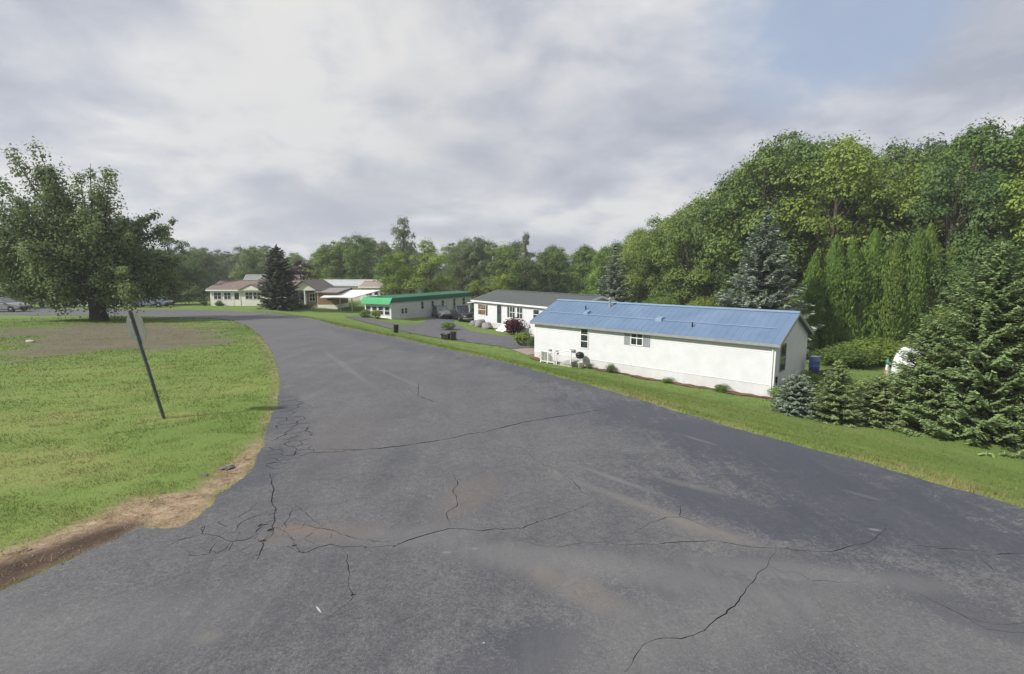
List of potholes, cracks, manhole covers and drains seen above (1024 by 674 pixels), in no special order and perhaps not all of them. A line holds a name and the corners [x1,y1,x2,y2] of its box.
crack [160,397,621,620]
crack [511,507,886,671]
crack [904,544,1019,571]
crack [920,594,1024,633]
